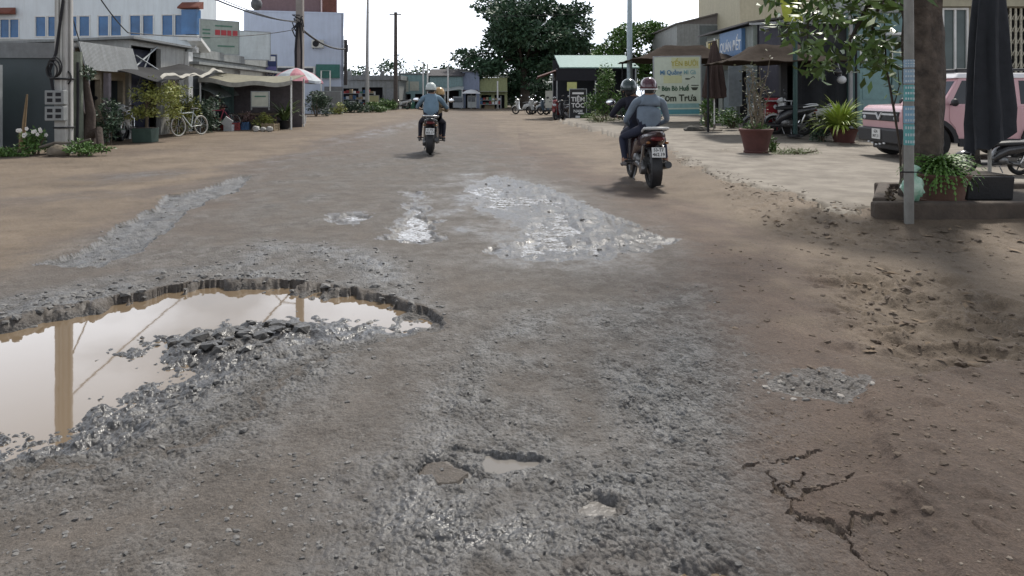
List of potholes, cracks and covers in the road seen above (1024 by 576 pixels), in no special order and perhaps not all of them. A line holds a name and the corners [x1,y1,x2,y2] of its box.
pothole [323,211,376,227]
pothole [412,443,556,487]
pothole [762,366,876,404]
pothole [32,175,253,268]
pothole [463,175,682,263]
pothole [366,191,449,245]
pothole [0,277,448,473]
crack [741,449,889,576]
